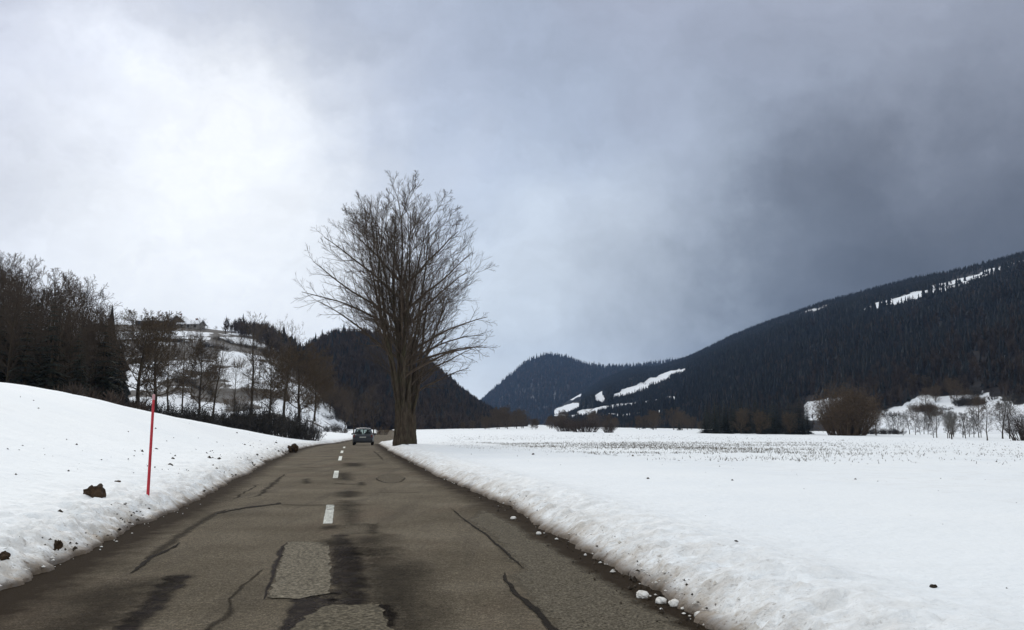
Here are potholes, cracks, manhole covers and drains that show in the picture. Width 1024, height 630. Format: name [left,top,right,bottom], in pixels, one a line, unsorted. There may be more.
crack [130,474,285,630]
crack [454,511,559,630]
